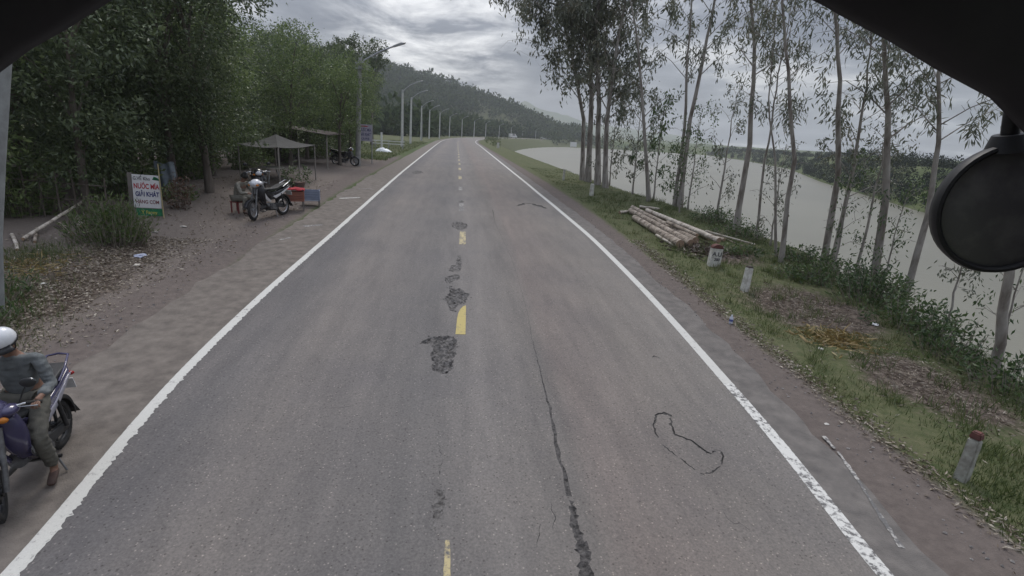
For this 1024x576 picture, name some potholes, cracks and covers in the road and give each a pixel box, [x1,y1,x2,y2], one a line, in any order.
pothole [448,255,462,272]
pothole [420,335,459,377]
crack [492,210,594,576]
pothole [442,286,472,312]
pothole [451,222,468,230]
